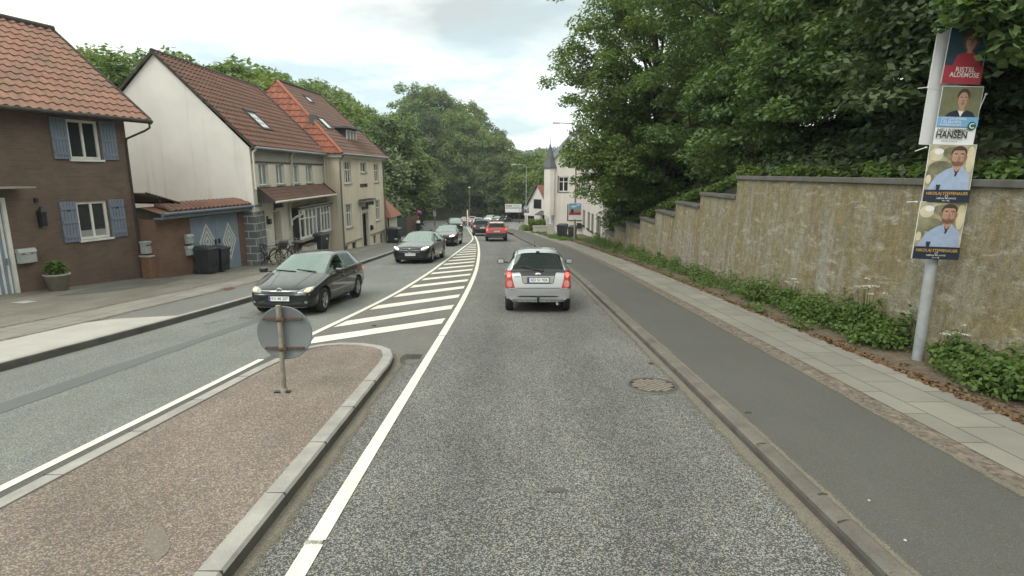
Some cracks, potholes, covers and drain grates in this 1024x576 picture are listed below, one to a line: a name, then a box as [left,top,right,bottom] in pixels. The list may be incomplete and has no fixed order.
manhole cover [618,377,679,394]
